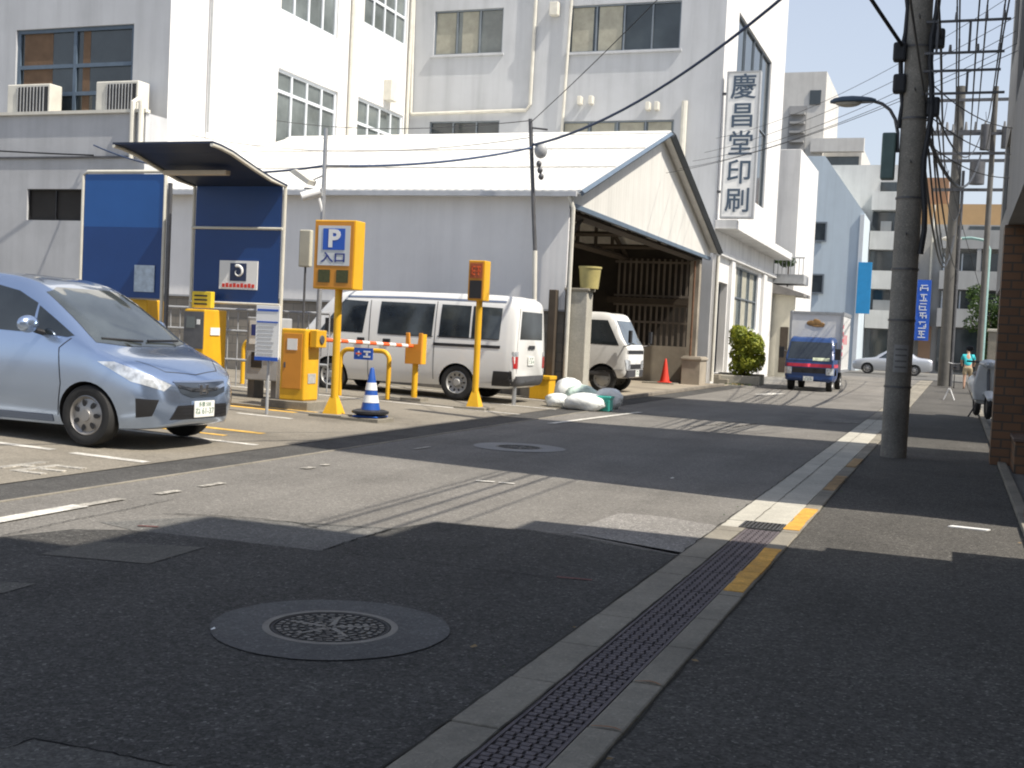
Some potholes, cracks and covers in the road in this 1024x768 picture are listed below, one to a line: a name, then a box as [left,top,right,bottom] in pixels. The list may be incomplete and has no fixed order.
drain grate [739,520,786,532]
manhole cover [210,600,450,660]
manhole cover [474,442,566,452]
